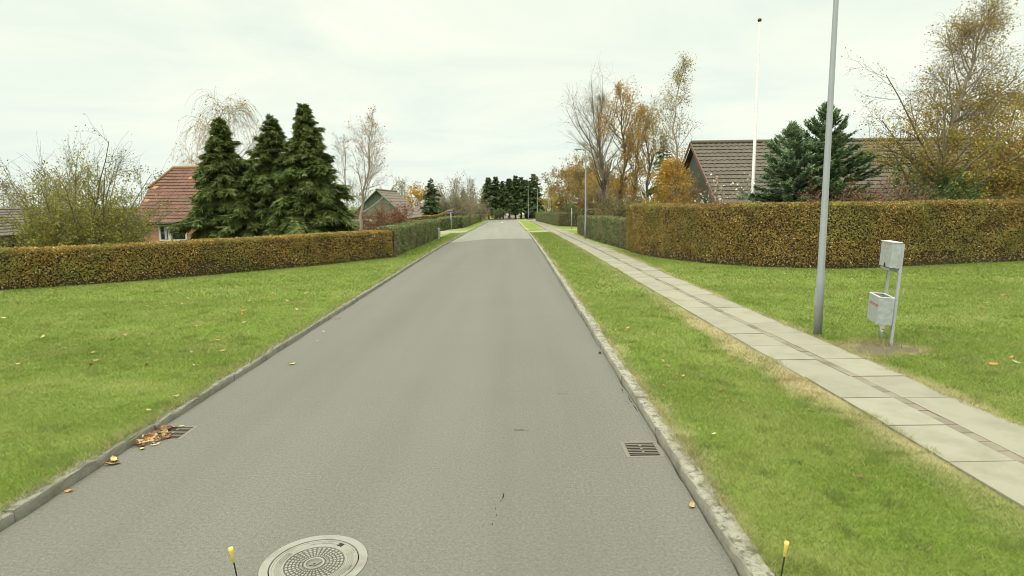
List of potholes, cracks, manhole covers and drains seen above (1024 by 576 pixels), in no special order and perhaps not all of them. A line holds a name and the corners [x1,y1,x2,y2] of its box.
drain grate [620,441,666,457]
manhole cover [258,535,368,576]
drain grate [144,426,198,440]
